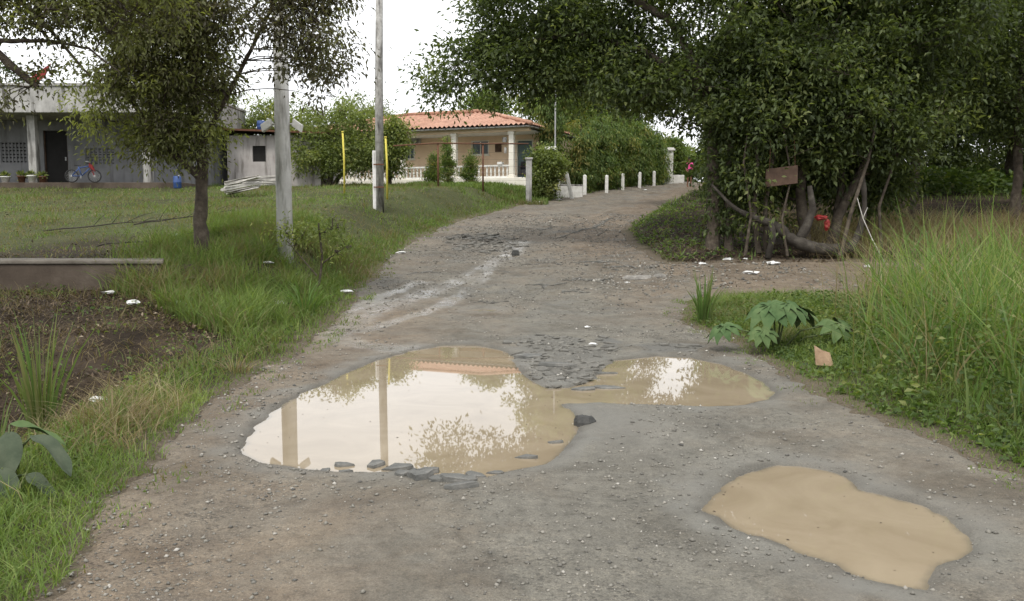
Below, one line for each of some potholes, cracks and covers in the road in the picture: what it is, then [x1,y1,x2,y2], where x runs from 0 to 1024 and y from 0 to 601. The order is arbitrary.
pothole [224,341,598,480]
pothole [676,456,1000,596]
pothole [548,353,788,407]
